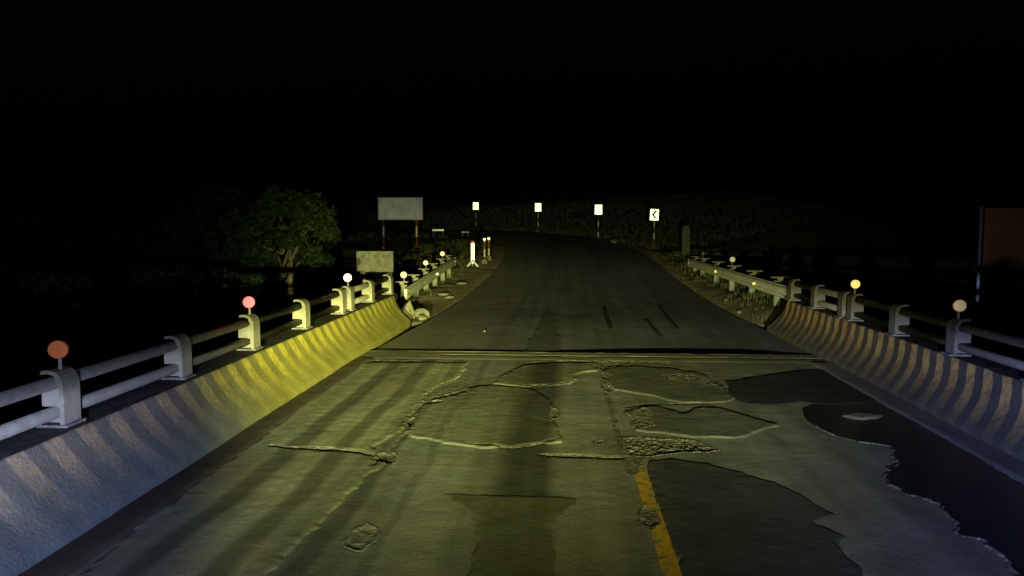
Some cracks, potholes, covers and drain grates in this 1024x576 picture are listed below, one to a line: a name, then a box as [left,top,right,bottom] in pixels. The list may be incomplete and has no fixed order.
pothole [405,385,563,449]
pothole [637,506,662,530]
pothole [595,360,631,371]
pothole [422,379,470,398]
pothole [600,366,735,404]
pothole [624,406,779,439]
pothole [621,437,721,457]
pothole [341,522,381,552]
crack [267,404,422,465]
pothole [726,369,877,406]
pothole [803,402,902,447]
